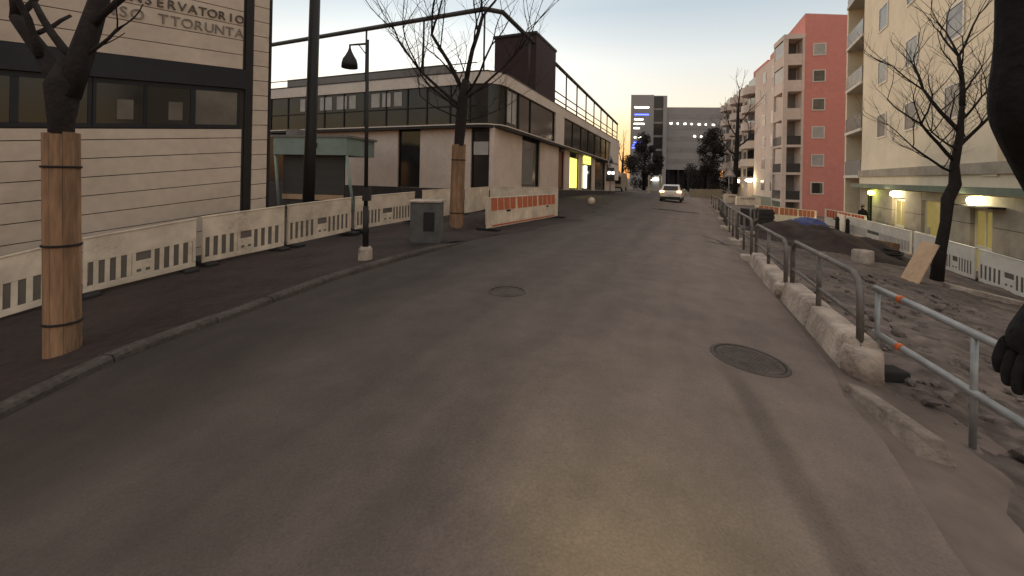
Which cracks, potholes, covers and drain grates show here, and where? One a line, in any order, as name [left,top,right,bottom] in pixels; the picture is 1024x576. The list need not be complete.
manhole cover [488,286,526,297]
manhole cover [710,343,792,378]
